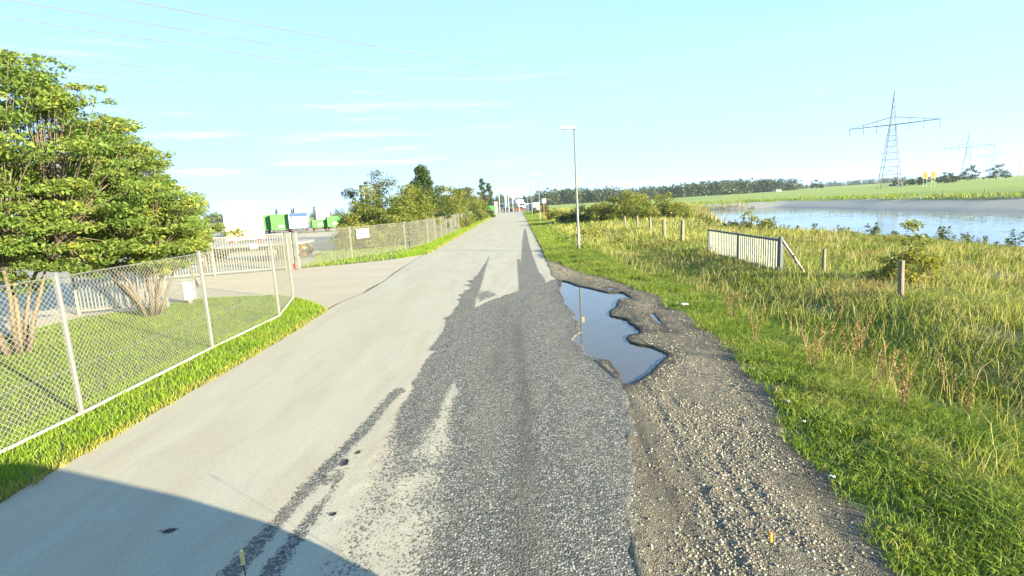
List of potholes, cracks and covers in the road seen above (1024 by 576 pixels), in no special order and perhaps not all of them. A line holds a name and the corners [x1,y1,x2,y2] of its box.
pothole [344,447,369,458]
pothole [558,282,670,385]
